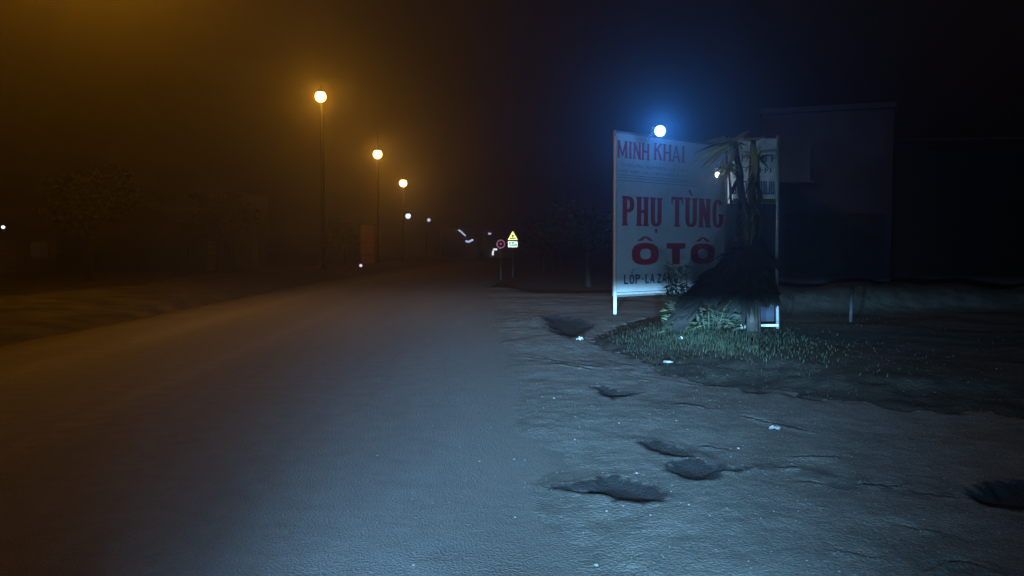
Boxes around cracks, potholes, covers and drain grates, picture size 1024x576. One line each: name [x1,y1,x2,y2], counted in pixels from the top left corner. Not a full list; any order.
pothole [591,386,641,400]
pothole [547,475,668,503]
pothole [542,315,596,338]
pothole [664,458,750,481]
pothole [636,439,696,457]
pothole [963,479,1024,511]
